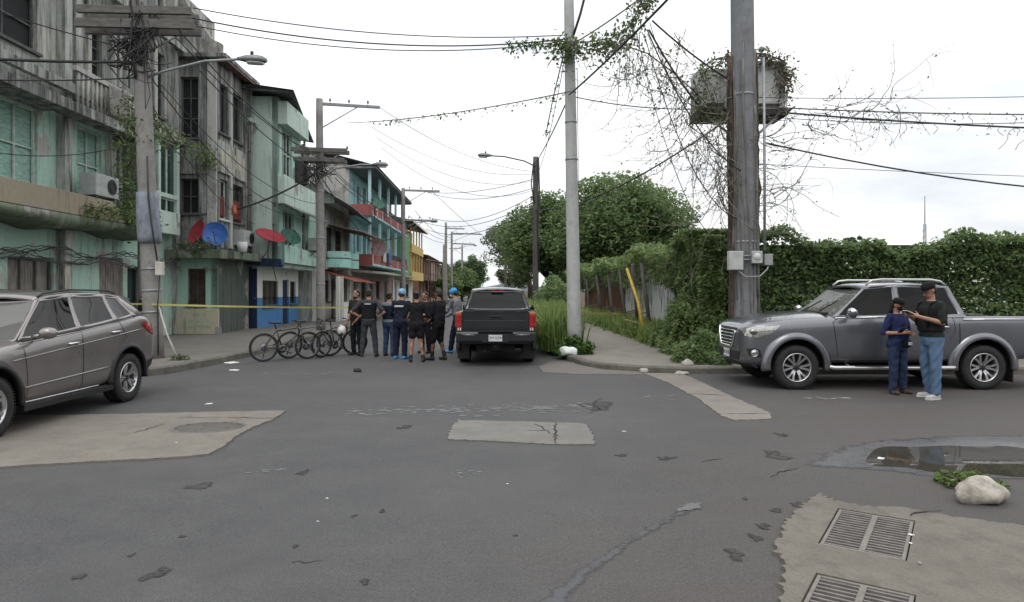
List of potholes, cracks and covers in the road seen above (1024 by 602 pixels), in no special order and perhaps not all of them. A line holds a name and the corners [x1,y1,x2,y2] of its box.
pothole [724,548,743,562]
pothole [579,401,613,410]
crack [534,423,558,443]
drain grate [819,509,914,561]
pothole [139,567,171,581]
manhole cover [168,421,248,433]
pothole [184,481,212,489]
pothole [766,451,792,460]
drain grate [804,575,916,602]
